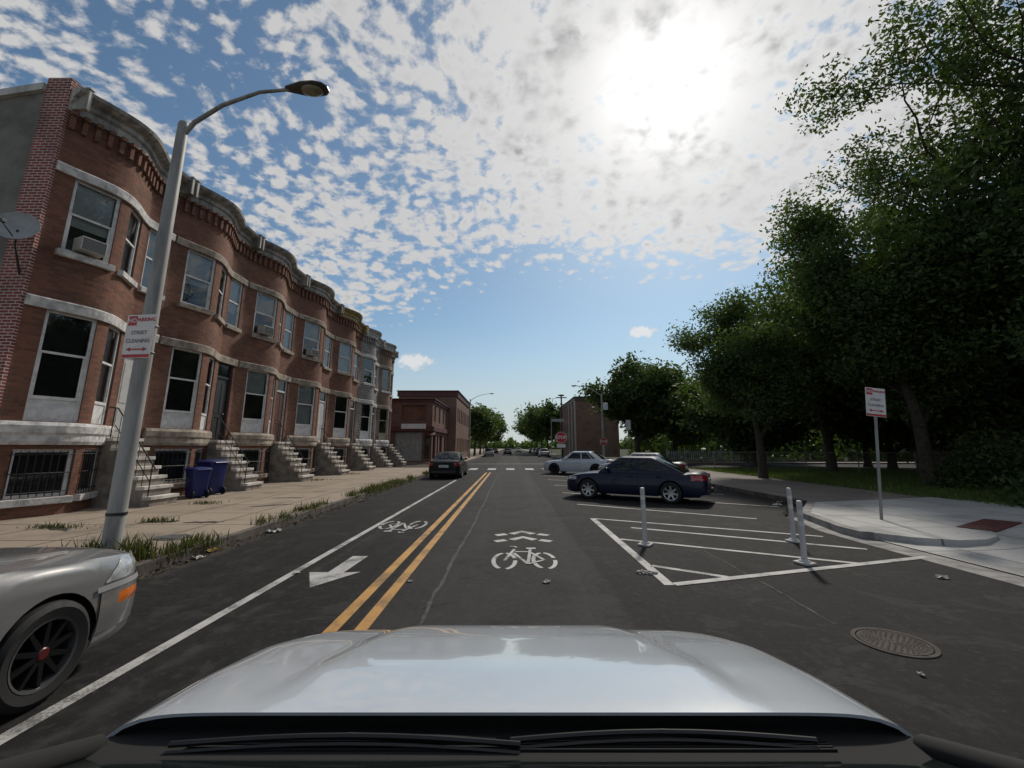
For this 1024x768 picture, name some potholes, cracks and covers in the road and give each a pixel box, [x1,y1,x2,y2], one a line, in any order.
manhole cover [850,627,942,659]
